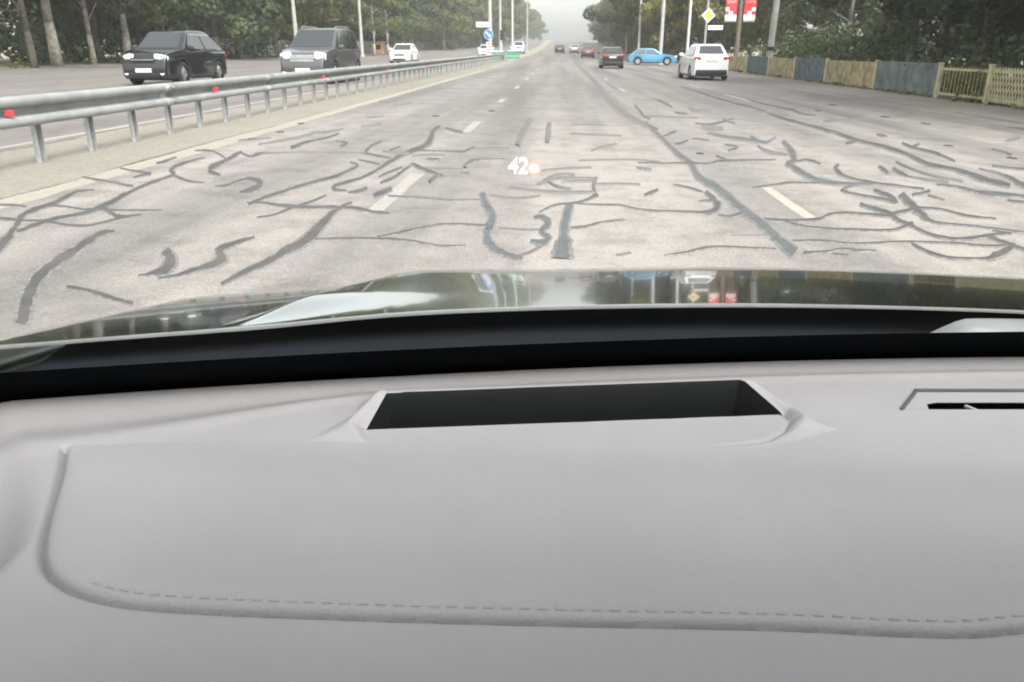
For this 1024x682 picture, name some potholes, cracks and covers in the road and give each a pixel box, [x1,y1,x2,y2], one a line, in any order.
crack [0,62,1024,326]
